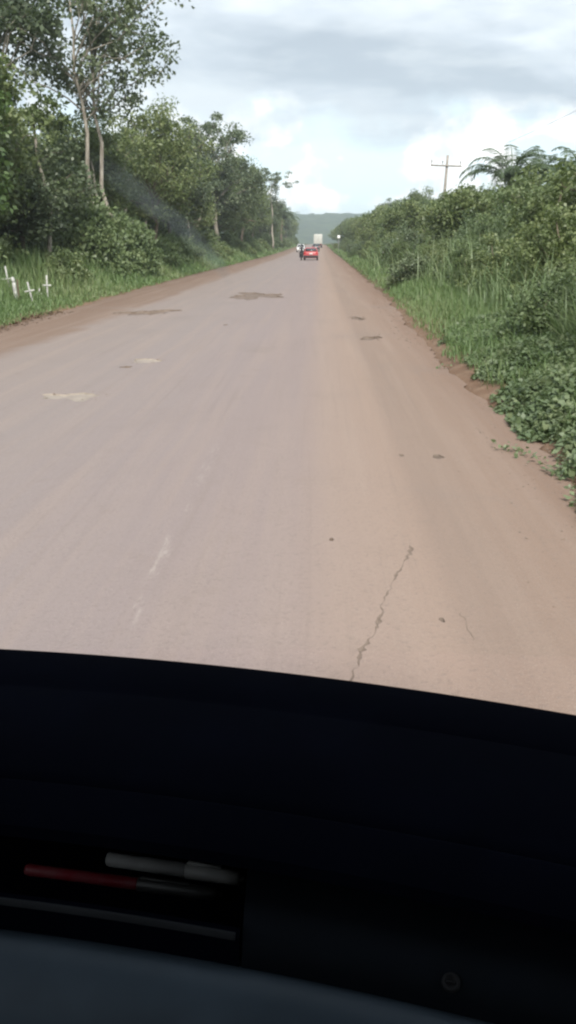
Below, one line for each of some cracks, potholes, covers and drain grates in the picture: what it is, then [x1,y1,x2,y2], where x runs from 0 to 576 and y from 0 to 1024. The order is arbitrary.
pothole [229,292,283,300]
crack [349,545,414,681]
